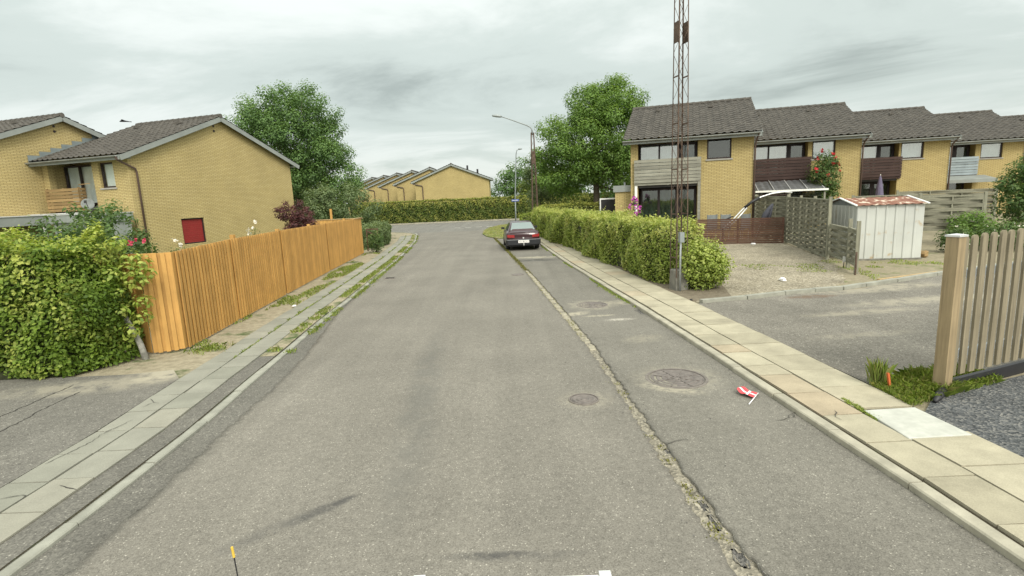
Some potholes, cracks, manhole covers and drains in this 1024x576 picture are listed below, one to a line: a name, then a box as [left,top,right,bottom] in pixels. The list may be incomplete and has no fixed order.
crack [0,385,81,432]
manhole cover [645,368,709,389]
manhole cover [569,393,599,405]
